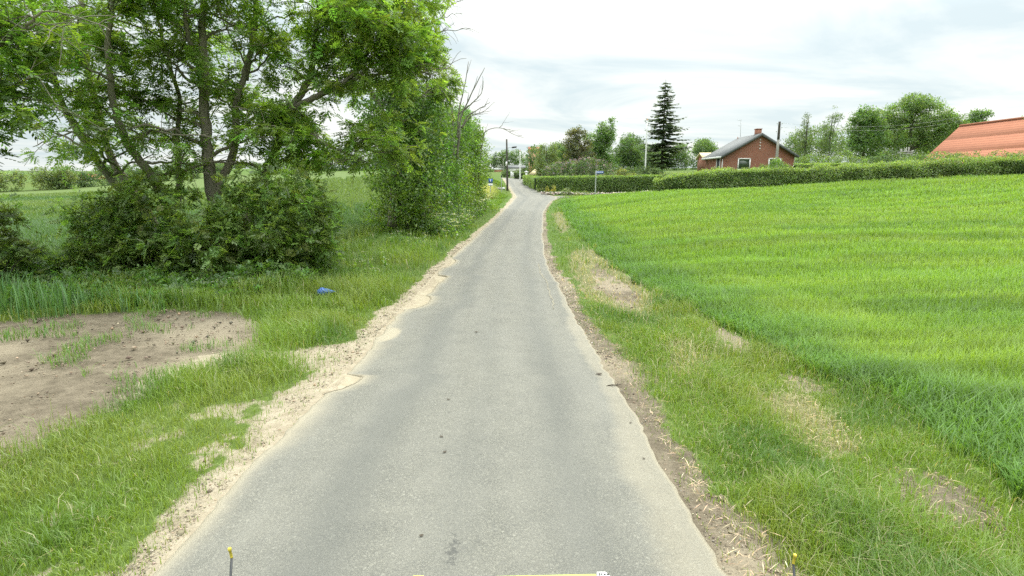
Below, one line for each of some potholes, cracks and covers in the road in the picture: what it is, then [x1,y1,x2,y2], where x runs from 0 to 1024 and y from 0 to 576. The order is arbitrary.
crack [538,264,555,310]
